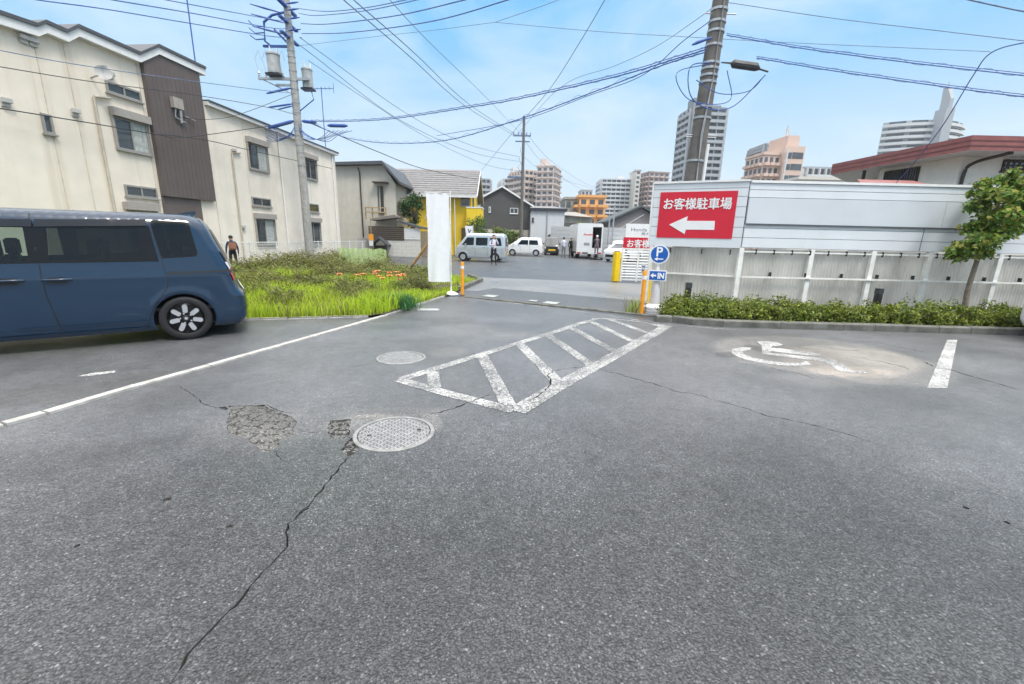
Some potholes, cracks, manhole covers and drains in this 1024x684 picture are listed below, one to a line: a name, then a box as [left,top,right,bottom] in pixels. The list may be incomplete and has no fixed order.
manhole cover [352,416,435,452]
crack [601,369,877,445]
pothole [341,438,359,457]
pothole [227,404,297,452]
pothole [327,419,351,439]
manhole cover [376,351,426,365]
crack [170,450,360,684]
